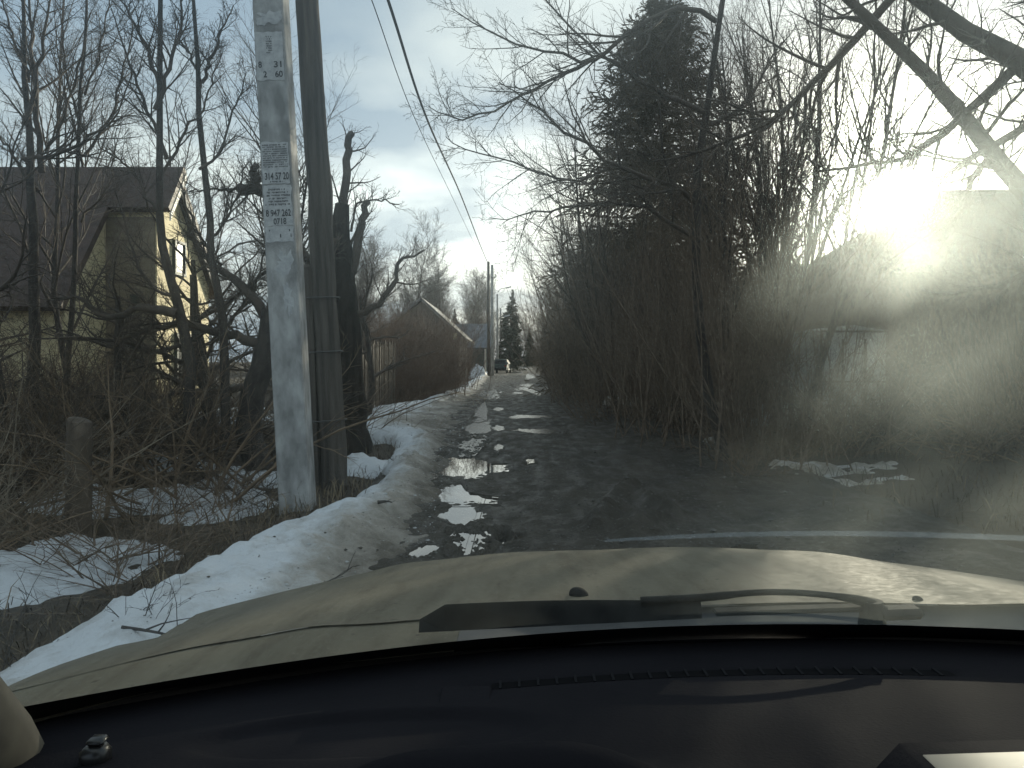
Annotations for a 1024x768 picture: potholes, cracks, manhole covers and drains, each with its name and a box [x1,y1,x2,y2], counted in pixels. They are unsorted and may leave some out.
pothole [469,400,489,423]
pothole [428,501,493,531]
pothole [435,451,515,482]
pothole [443,521,500,559]
pothole [399,541,443,558]
pothole [431,481,502,507]
pothole [457,417,495,436]
